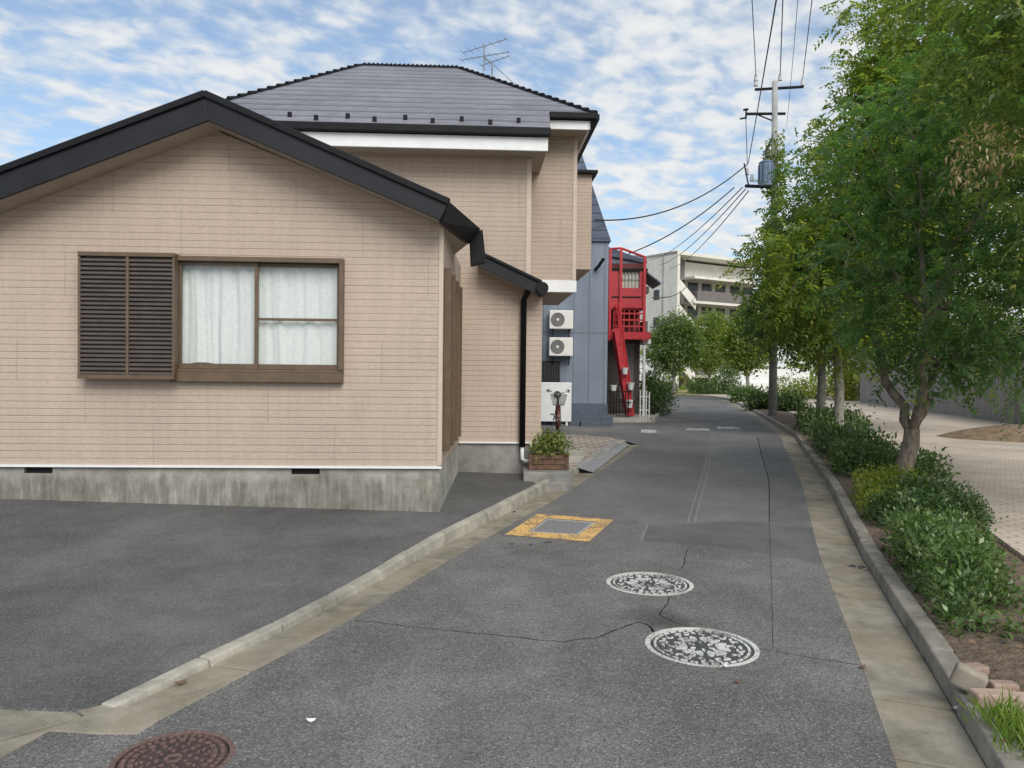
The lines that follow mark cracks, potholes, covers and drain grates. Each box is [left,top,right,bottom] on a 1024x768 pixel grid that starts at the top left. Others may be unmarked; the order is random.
manhole cover [645,627,760,667]
manhole cover [108,730,235,768]
crack [355,596,687,642]
manhole cover [606,572,694,597]
manhole cover [529,518,596,535]
